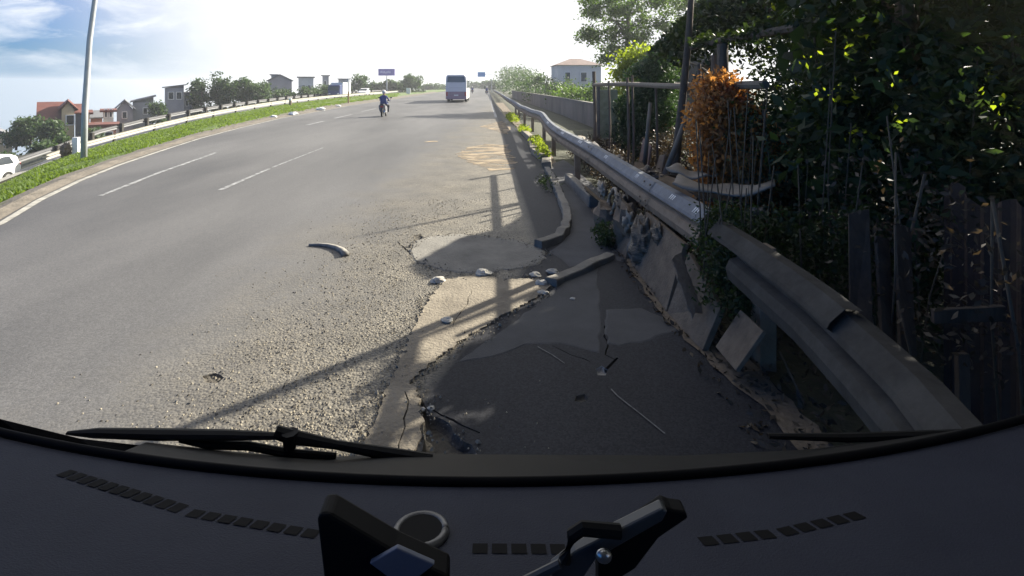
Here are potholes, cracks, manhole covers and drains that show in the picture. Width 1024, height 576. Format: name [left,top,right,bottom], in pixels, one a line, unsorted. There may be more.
crack [553,324,618,373]
pothole [419,396,476,454]
pothole [203,373,224,383]
